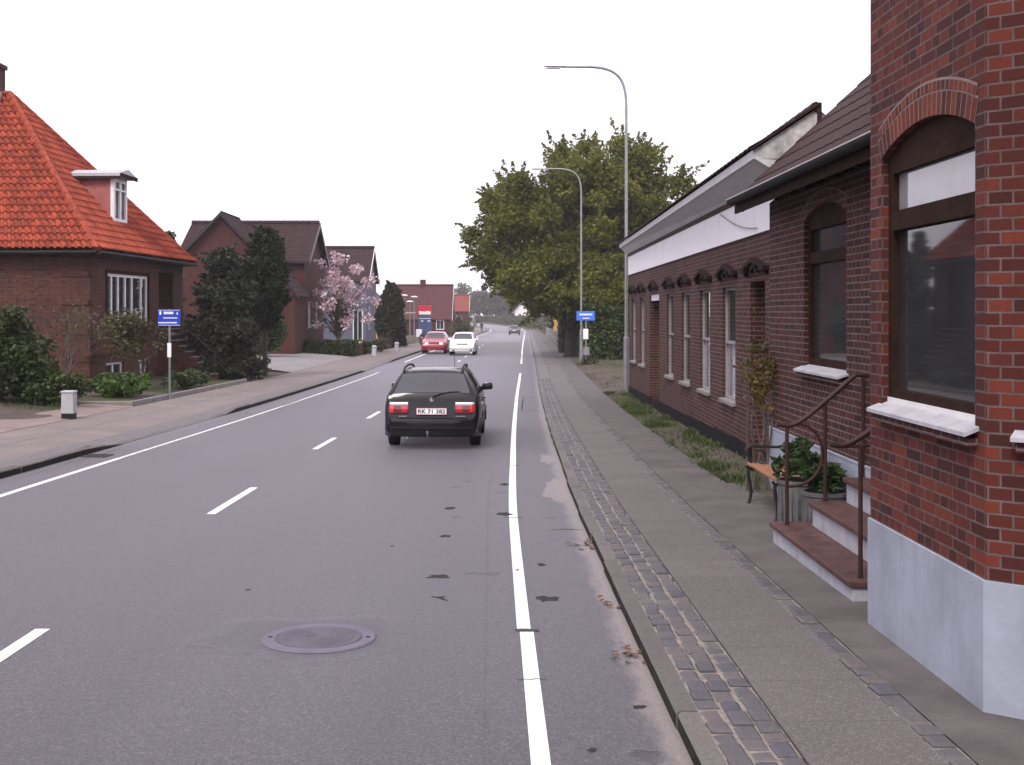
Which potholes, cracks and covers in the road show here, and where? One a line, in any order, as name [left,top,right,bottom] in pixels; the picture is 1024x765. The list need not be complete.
manhole cover [261,623,376,653]
